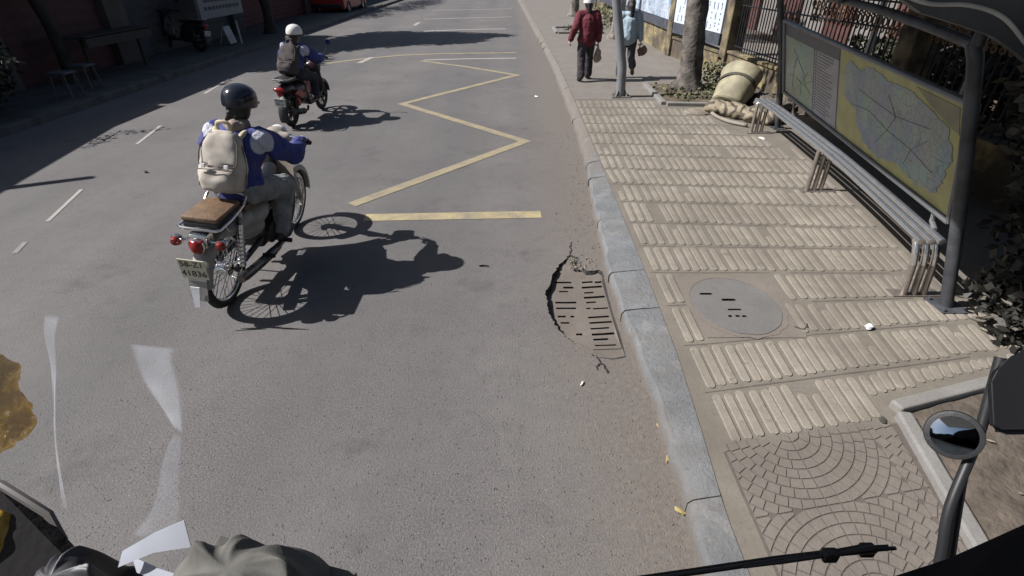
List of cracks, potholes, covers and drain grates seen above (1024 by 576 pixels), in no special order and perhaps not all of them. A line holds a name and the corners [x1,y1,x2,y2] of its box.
drain grate [552,278,622,350]
manhole cover [675,276,808,339]
